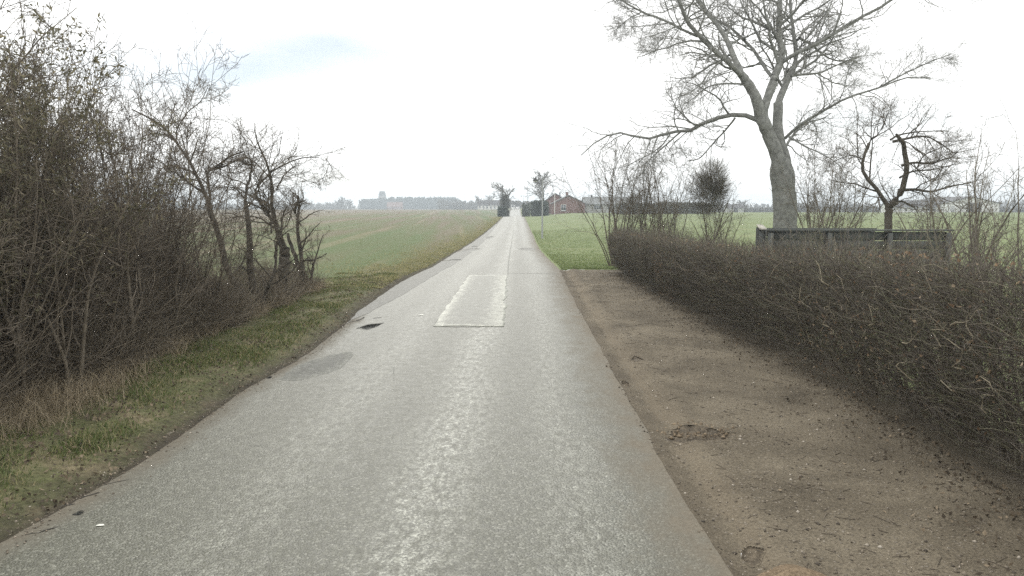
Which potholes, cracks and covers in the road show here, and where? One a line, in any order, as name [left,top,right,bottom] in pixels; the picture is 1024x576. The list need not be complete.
pothole [741,544,766,568]
pothole [665,423,737,445]
